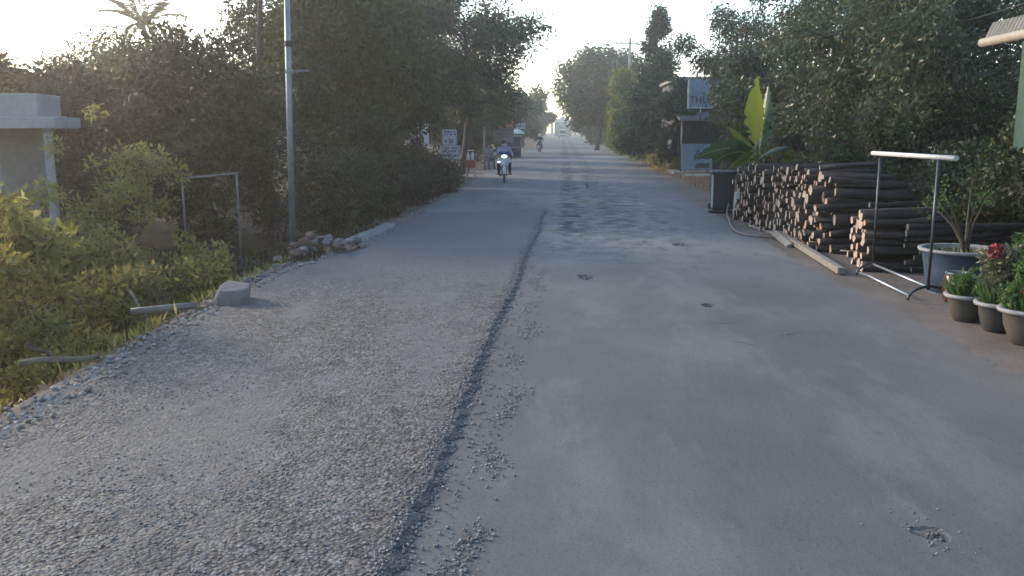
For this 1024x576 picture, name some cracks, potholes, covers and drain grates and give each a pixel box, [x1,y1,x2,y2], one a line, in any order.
pothole [908,526,952,543]
